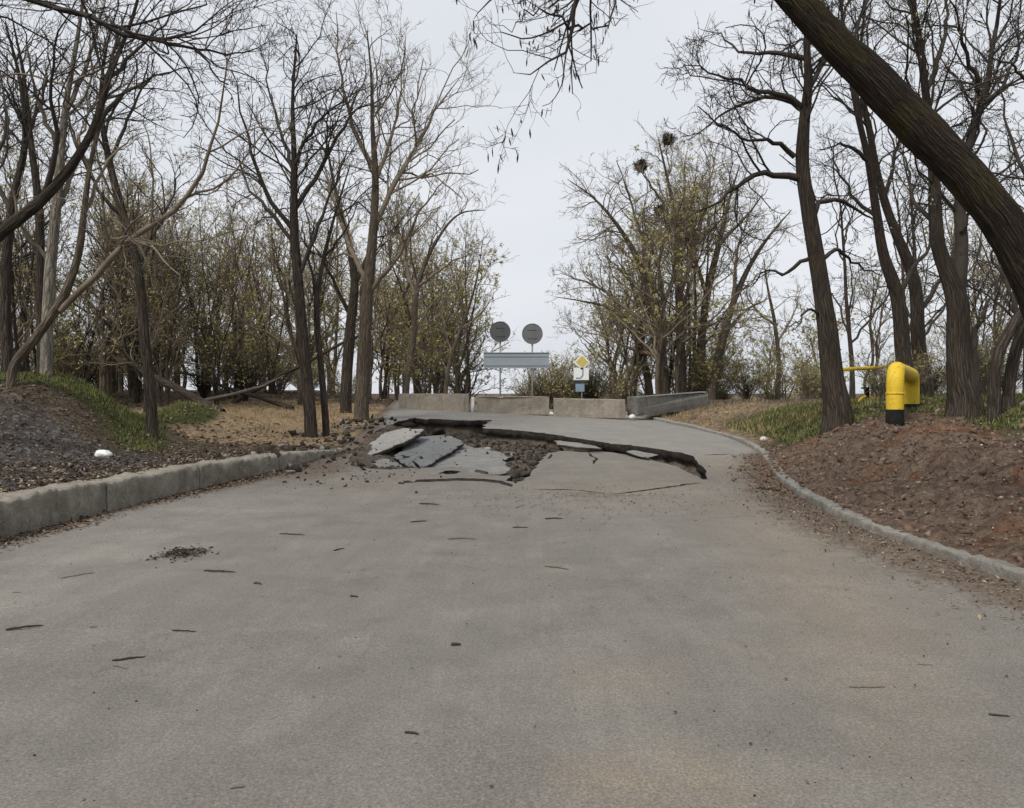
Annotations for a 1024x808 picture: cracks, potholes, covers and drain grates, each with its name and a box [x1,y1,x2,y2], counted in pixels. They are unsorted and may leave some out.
crack [538,483,696,494]
pothole [348,418,707,483]
crack [403,478,513,487]
